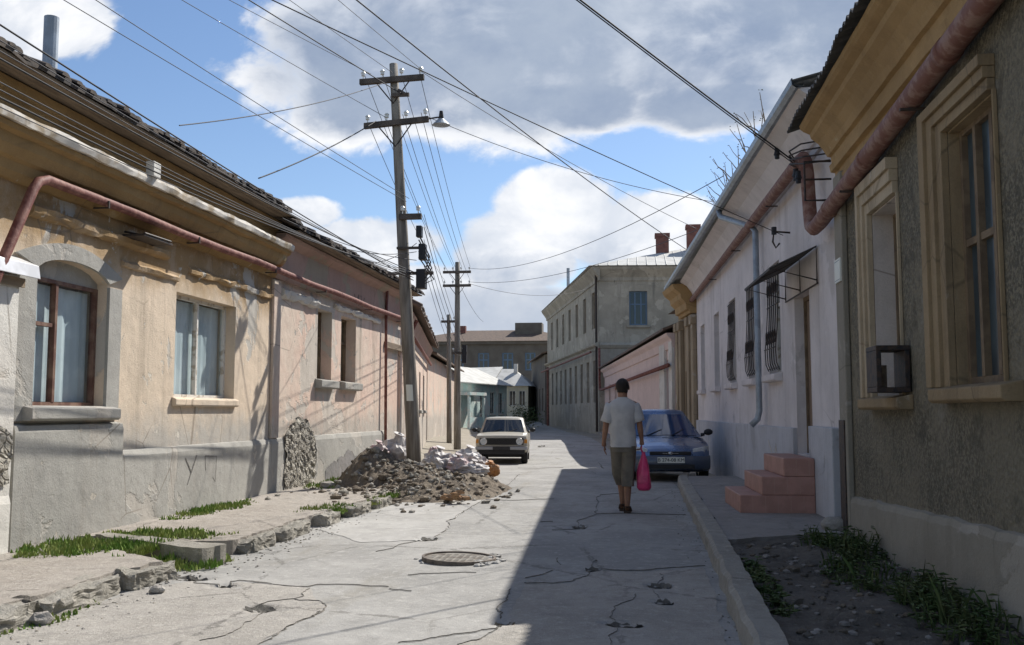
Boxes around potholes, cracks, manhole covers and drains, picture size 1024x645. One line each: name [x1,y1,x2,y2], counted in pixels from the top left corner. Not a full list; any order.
manhole cover [414,551,506,567]
pothole [245,604,276,613]
crack [376,499,483,552]
crack [398,559,705,645]
crack [541,493,686,530]
crack [199,588,327,644]
